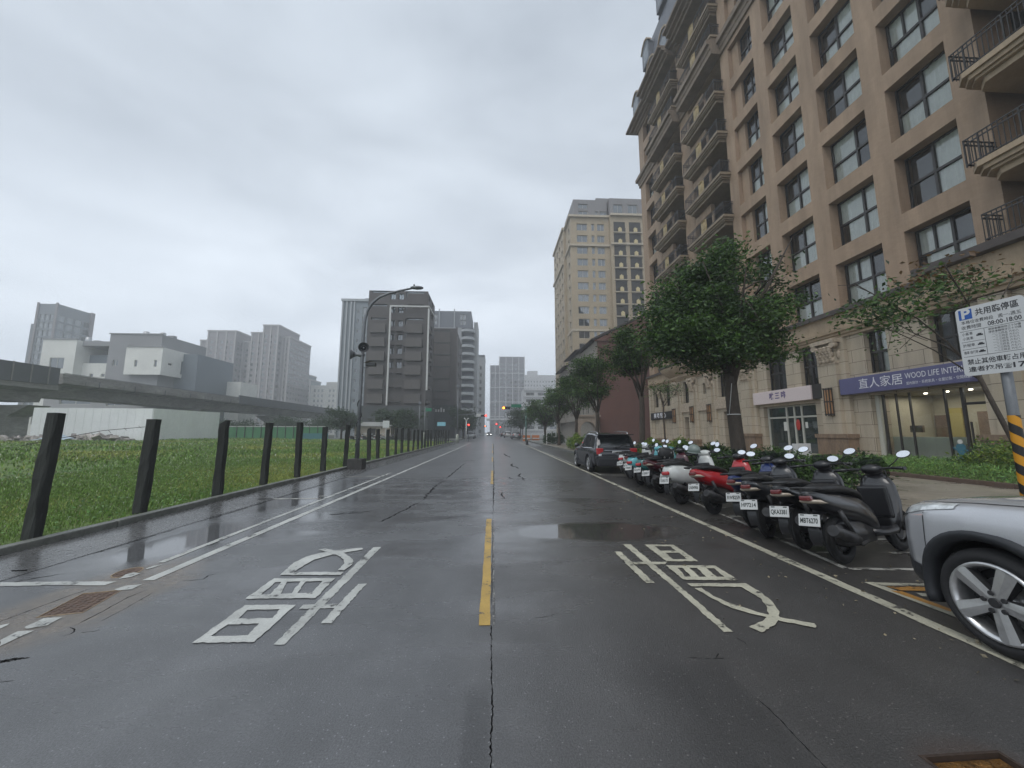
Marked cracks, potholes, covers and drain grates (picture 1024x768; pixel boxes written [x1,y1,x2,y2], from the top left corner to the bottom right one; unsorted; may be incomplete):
crack [328,463,466,523]
crack [501,454,524,499]
